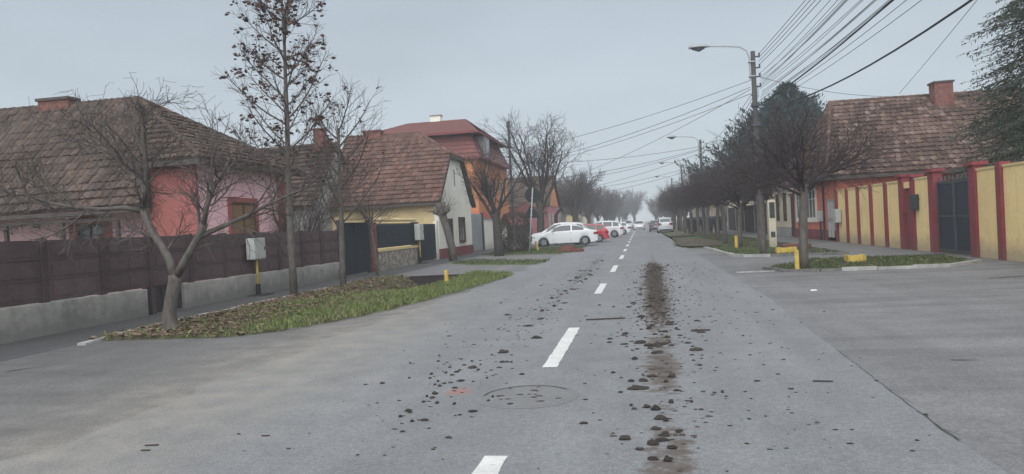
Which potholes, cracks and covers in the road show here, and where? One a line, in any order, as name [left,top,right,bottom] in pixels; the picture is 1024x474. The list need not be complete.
manhole cover [476,384,580,409]
